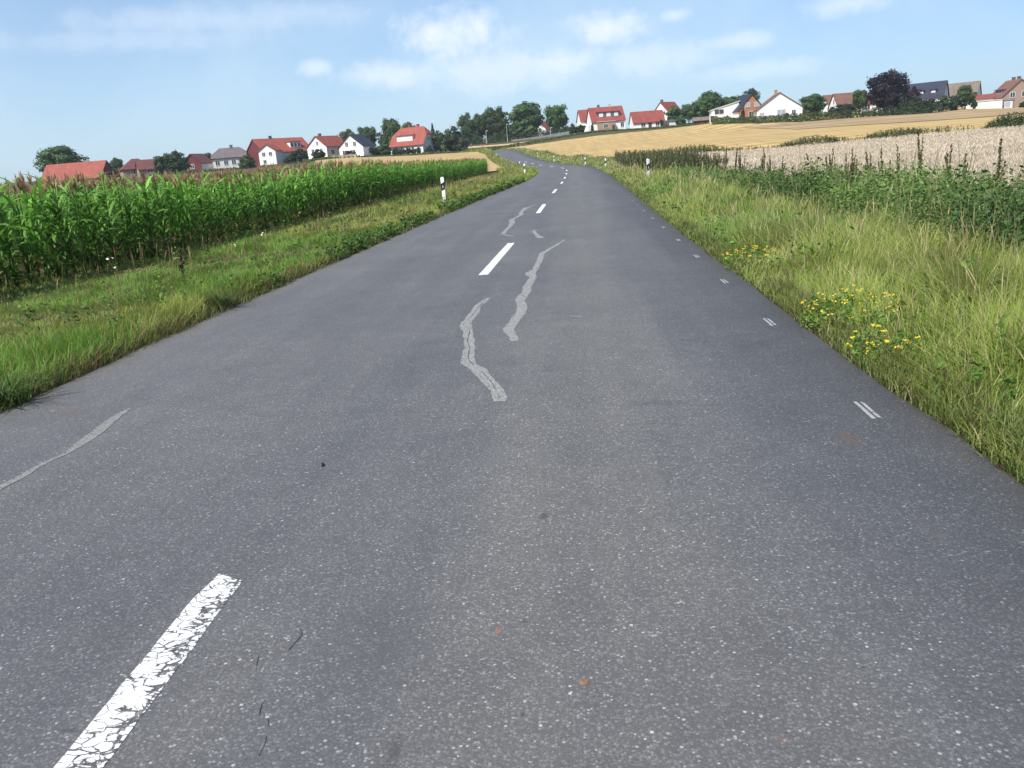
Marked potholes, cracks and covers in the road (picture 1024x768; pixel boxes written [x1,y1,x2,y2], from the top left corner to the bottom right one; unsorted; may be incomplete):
crack [241,625,302,766]
